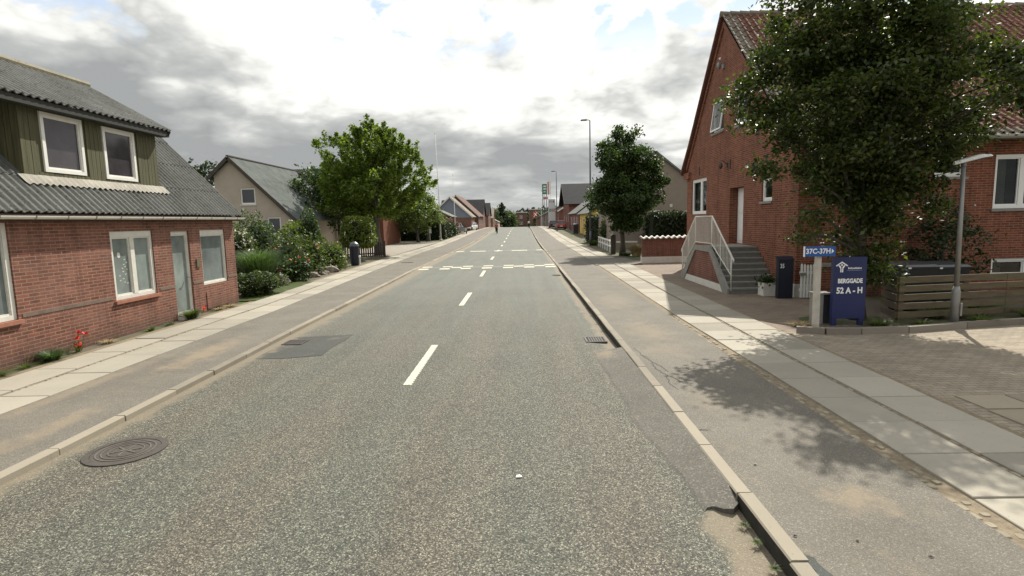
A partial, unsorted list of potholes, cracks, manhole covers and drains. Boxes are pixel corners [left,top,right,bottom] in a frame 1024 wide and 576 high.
manhole cover [81,436,169,467]
crack [634,348,684,389]
